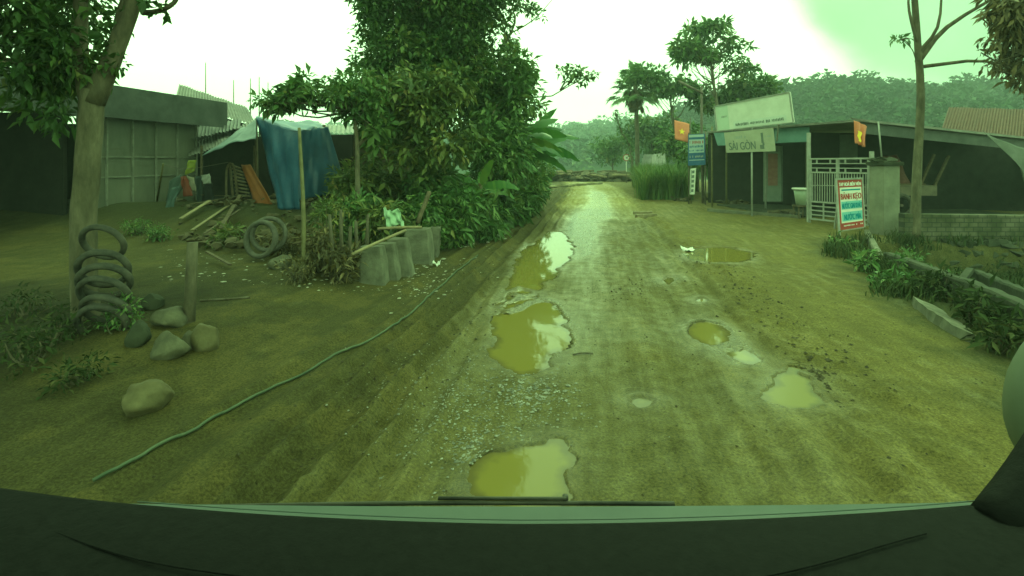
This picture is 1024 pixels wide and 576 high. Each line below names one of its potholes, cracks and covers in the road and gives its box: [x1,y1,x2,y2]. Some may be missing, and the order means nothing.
pothole [476,296,582,379]
pothole [678,318,748,353]
pothole [496,230,581,297]
pothole [446,426,593,506]
pothole [745,361,848,419]
pothole [675,245,765,265]
